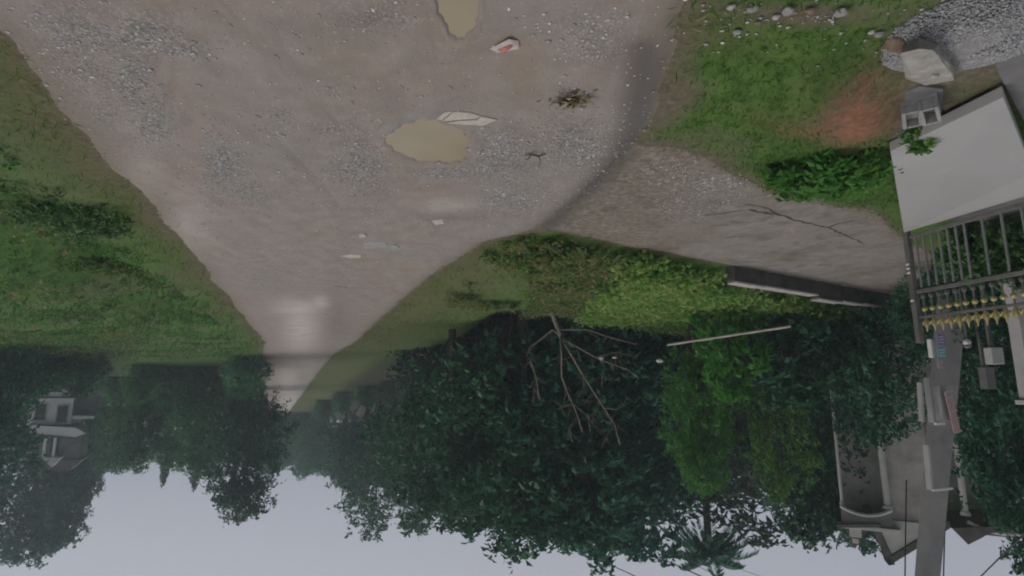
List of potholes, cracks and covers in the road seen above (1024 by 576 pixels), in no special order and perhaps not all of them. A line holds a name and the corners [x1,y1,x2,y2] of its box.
crack [704,205,865,244]
pothole [370,110,481,167]
pothole [429,0,486,49]
